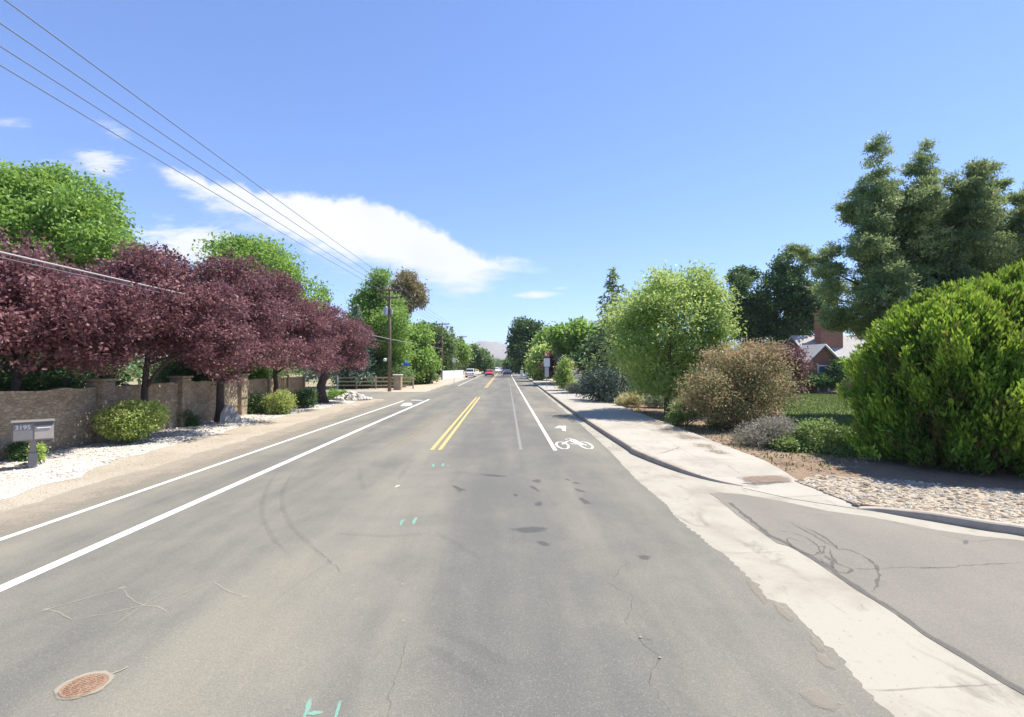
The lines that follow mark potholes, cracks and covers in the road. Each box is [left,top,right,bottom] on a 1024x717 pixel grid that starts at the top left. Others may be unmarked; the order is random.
manhole cover [54,667,126,699]
